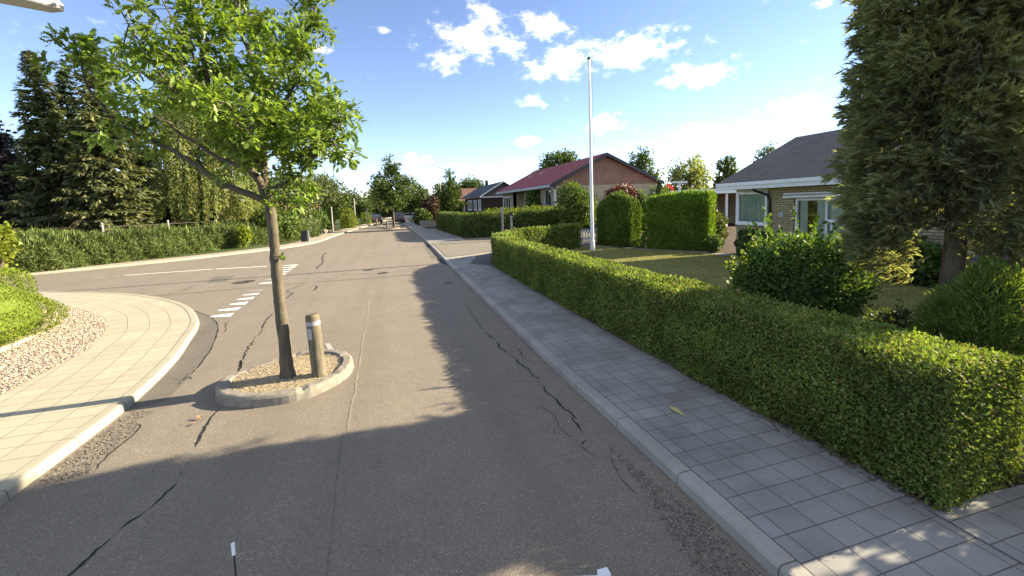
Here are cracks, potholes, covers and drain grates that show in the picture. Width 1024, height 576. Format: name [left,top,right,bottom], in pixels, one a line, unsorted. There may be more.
crack [468,306,636,493]
crack [175,310,229,387]
crack [238,253,325,372]
